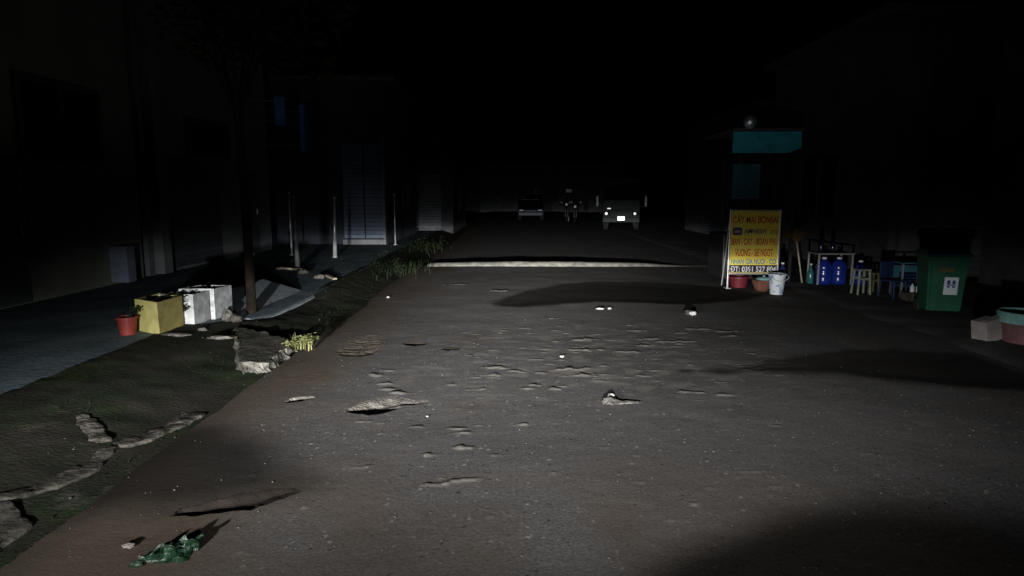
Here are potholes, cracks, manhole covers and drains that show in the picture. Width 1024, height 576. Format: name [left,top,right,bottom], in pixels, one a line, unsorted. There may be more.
pothole [344,395,430,416]
pothole [168,486,303,517]
